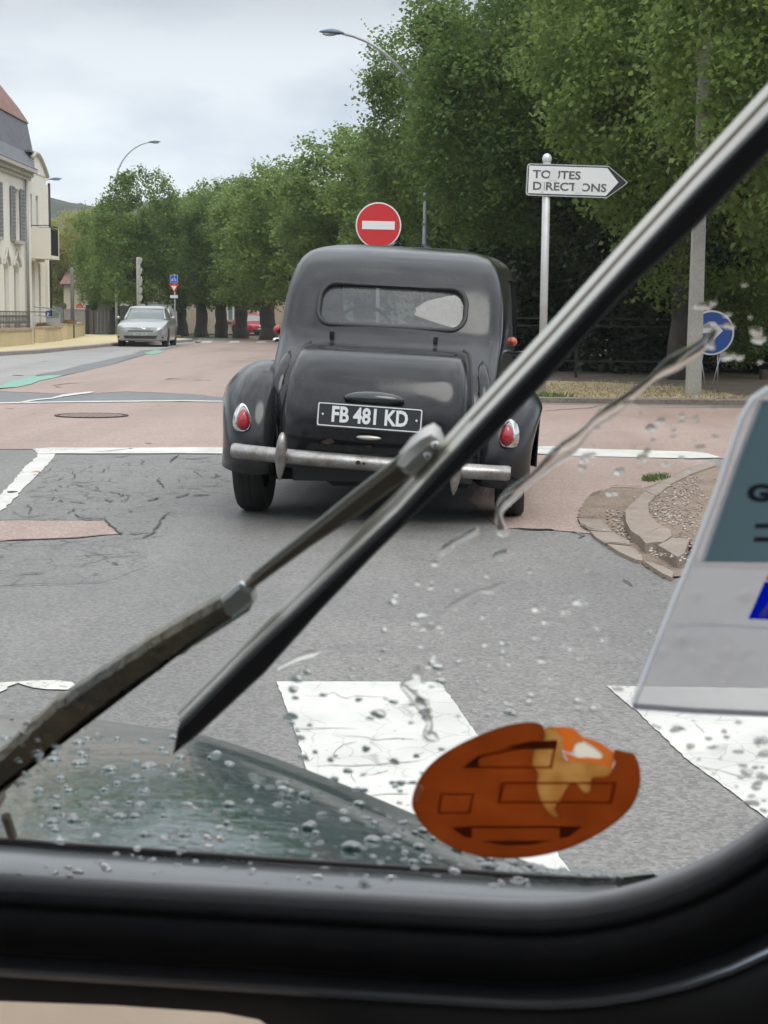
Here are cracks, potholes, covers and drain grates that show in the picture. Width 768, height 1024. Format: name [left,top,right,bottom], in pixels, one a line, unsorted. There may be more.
crack [0,448,229,574]
